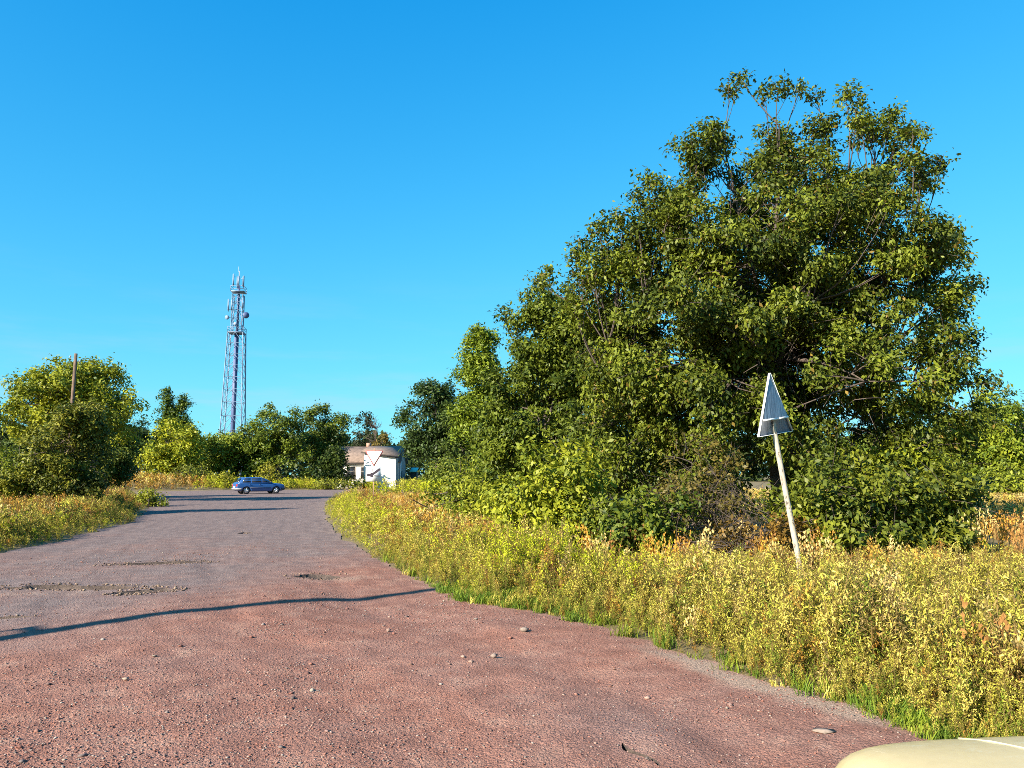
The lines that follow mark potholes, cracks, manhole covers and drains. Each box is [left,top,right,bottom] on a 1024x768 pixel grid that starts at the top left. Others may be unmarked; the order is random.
pothole [0,582,163,591]
crack [621,743,660,766]
pothole [284,572,349,580]
pothole [102,586,190,596]
